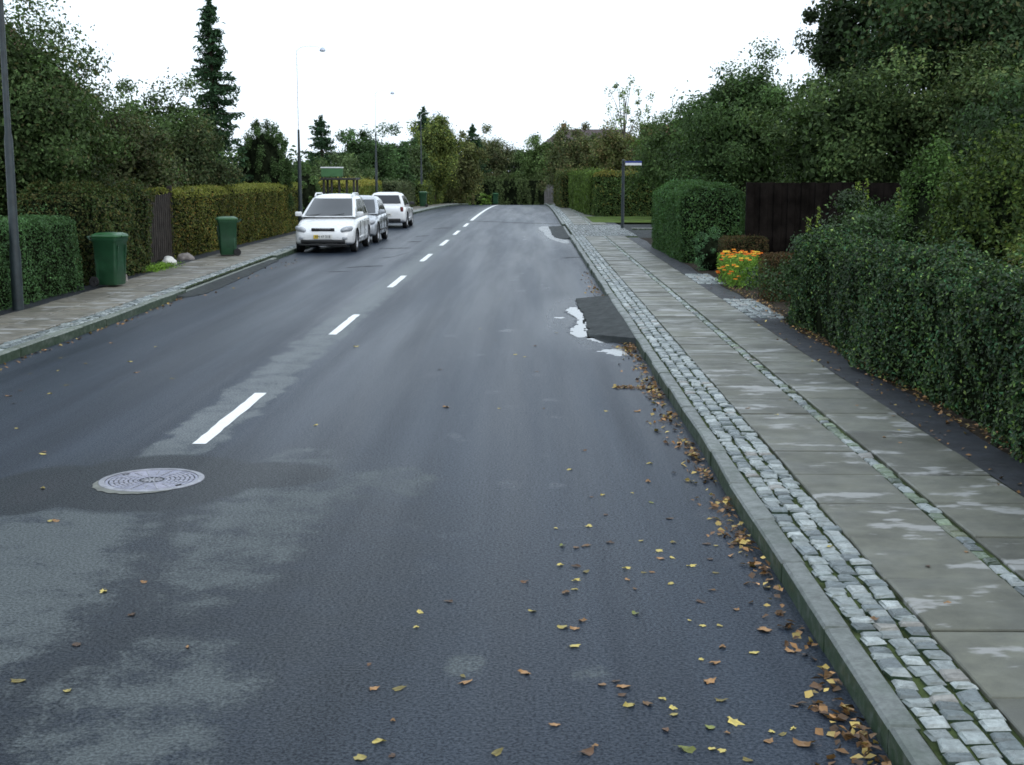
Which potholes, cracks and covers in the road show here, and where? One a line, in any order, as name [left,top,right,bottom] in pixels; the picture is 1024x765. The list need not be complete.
manhole cover [92,468,205,494]
